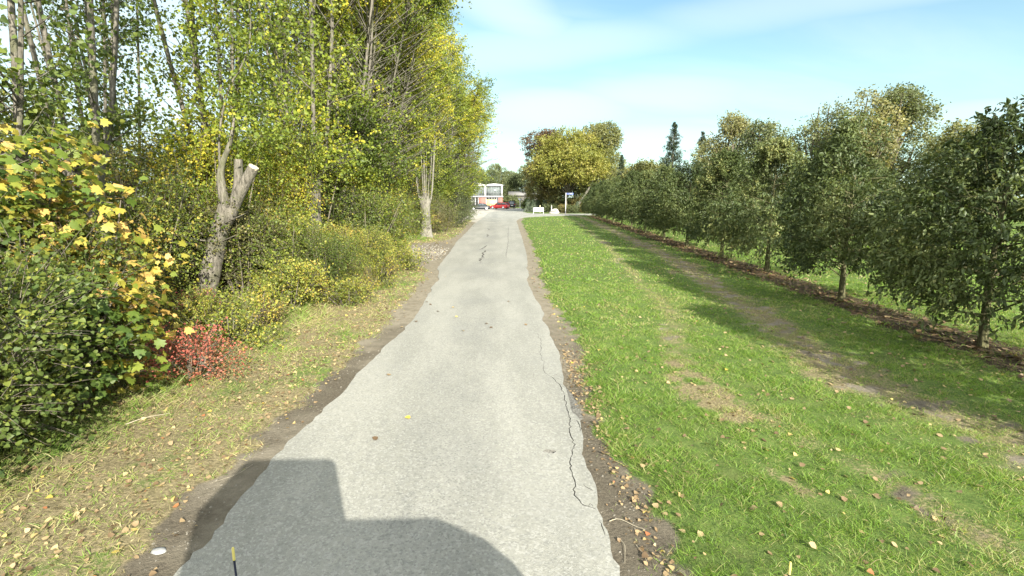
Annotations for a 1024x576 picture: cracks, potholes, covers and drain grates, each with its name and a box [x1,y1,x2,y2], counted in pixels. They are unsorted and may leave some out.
crack [538,336,605,534]
